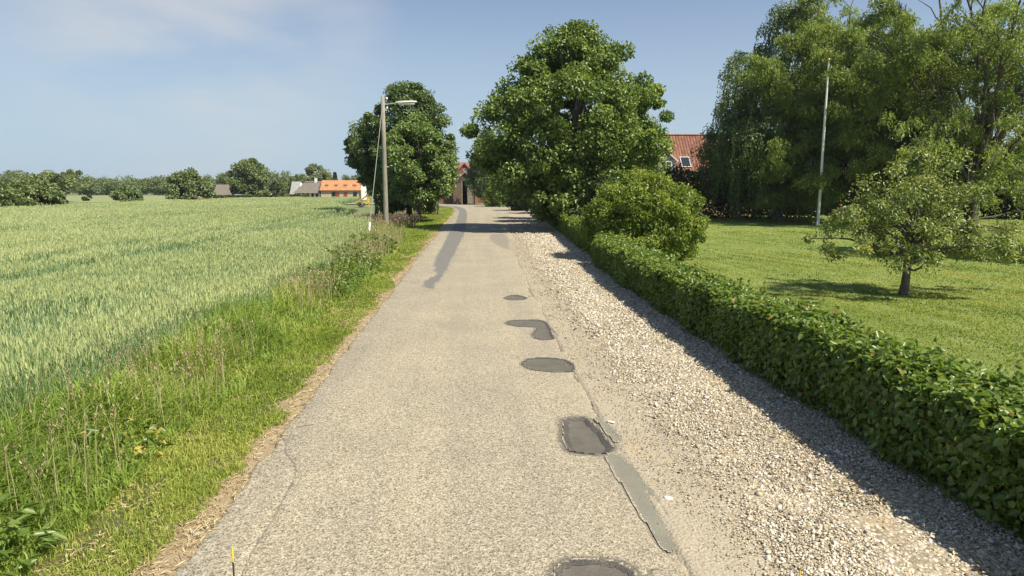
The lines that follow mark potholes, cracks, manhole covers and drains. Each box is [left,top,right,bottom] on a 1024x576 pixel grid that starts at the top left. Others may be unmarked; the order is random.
crack [241,424,314,576]
